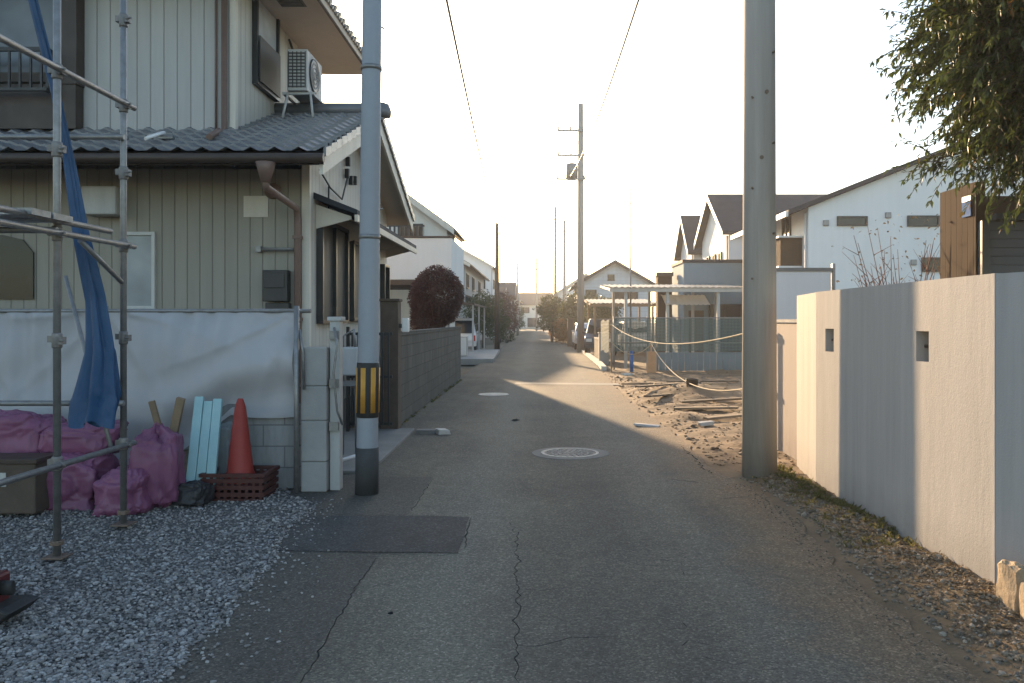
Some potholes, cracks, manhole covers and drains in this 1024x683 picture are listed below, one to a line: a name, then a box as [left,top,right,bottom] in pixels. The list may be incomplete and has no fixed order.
manhole cover [532,447,609,460]
crack [510,520,618,682]
